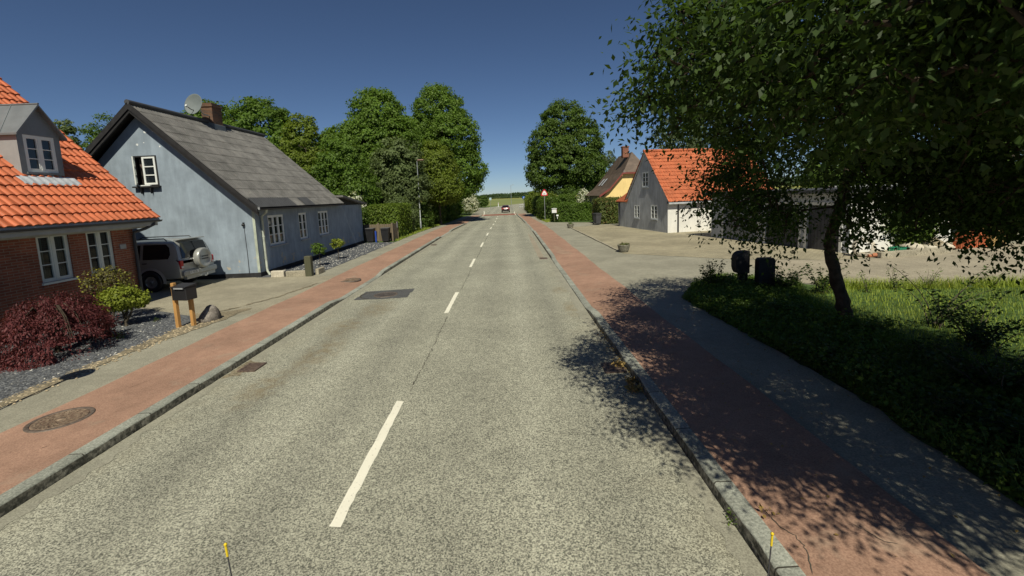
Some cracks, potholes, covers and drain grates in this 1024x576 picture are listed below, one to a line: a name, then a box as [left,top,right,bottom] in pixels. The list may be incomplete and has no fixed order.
crack [766,512,813,575]
drain grate [237,362,267,372]
manhole cover [23,407,96,433]
